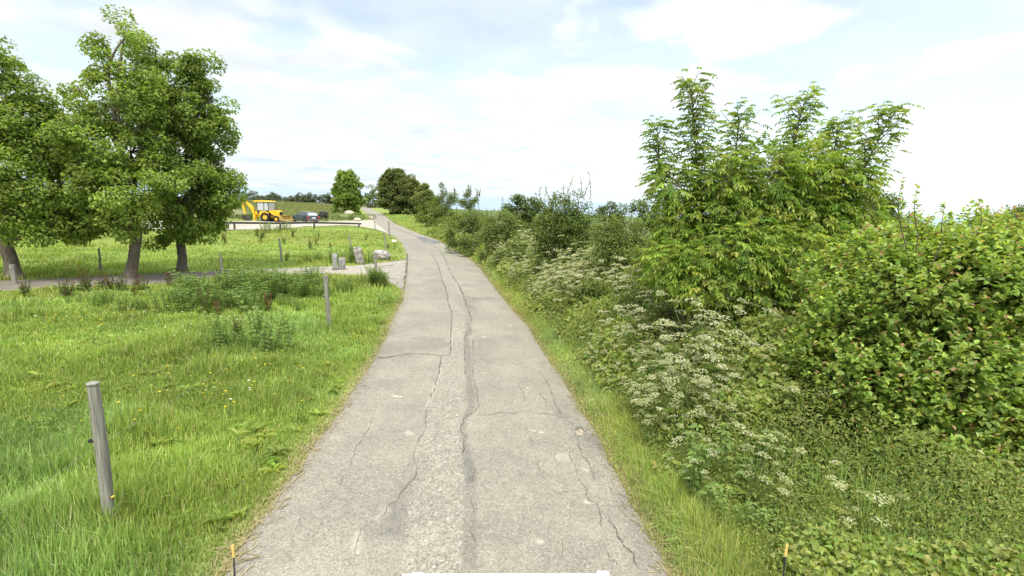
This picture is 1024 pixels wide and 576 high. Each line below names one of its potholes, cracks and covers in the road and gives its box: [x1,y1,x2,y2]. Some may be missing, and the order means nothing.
crack [345,254,640,571]
